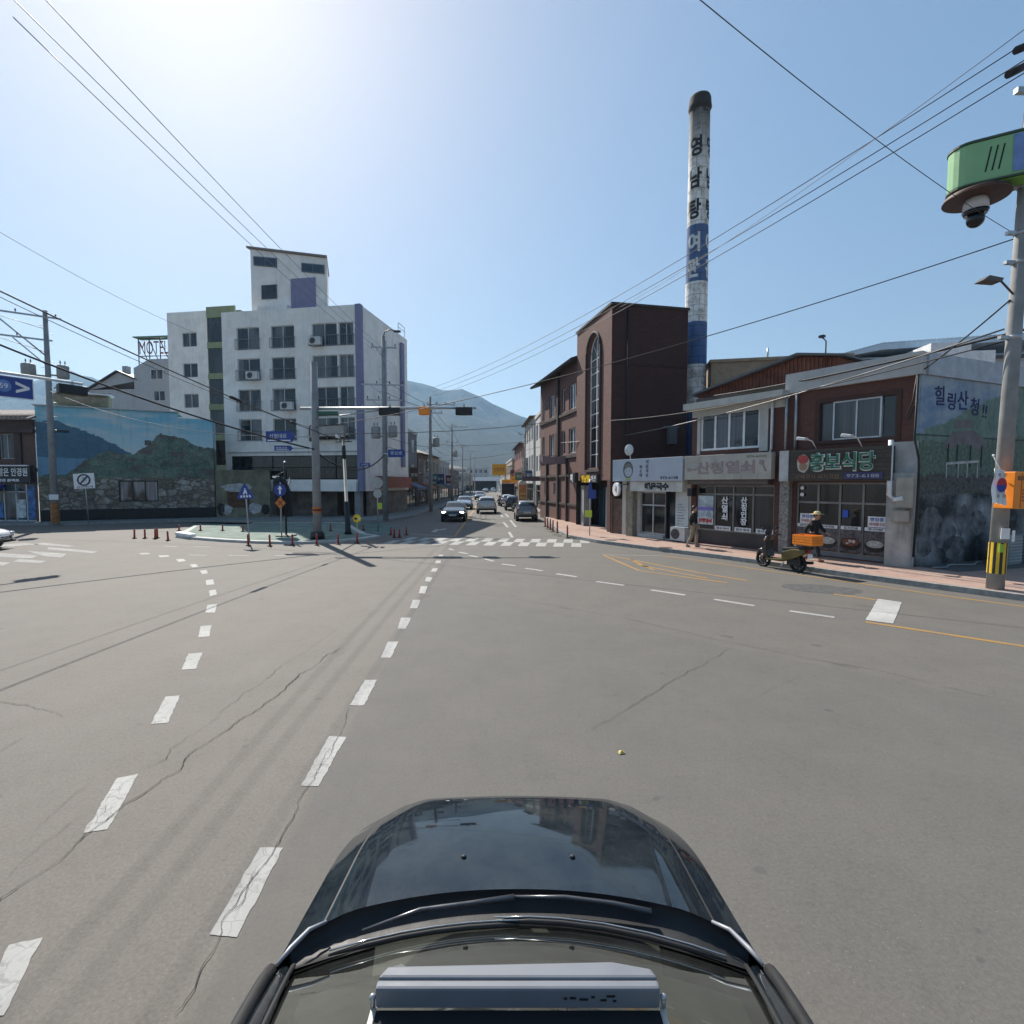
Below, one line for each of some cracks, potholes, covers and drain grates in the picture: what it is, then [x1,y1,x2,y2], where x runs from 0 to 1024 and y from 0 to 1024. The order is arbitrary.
crack [0,628,343,899]
